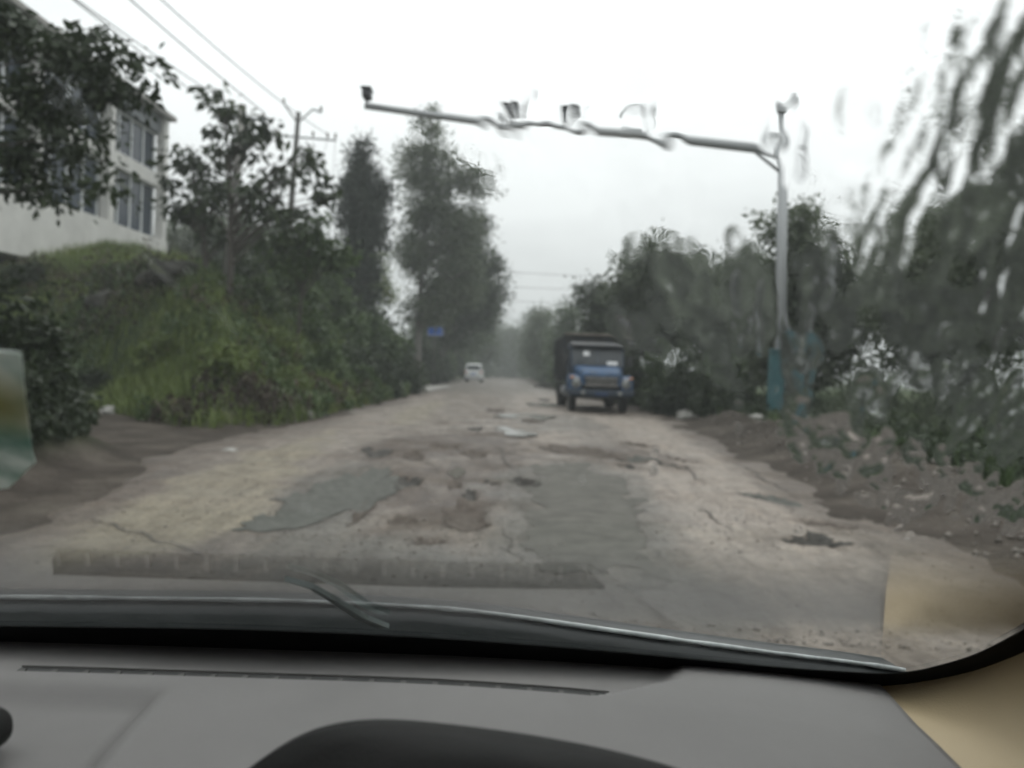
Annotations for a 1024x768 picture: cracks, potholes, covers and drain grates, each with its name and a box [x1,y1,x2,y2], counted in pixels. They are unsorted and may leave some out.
pothole [782,531,854,548]
pothole [462,489,476,501]
pothole [365,449,395,457]
pothole [510,476,542,487]
pothole [392,476,426,490]
crack [92,518,203,555]
pothole [441,497,492,532]
